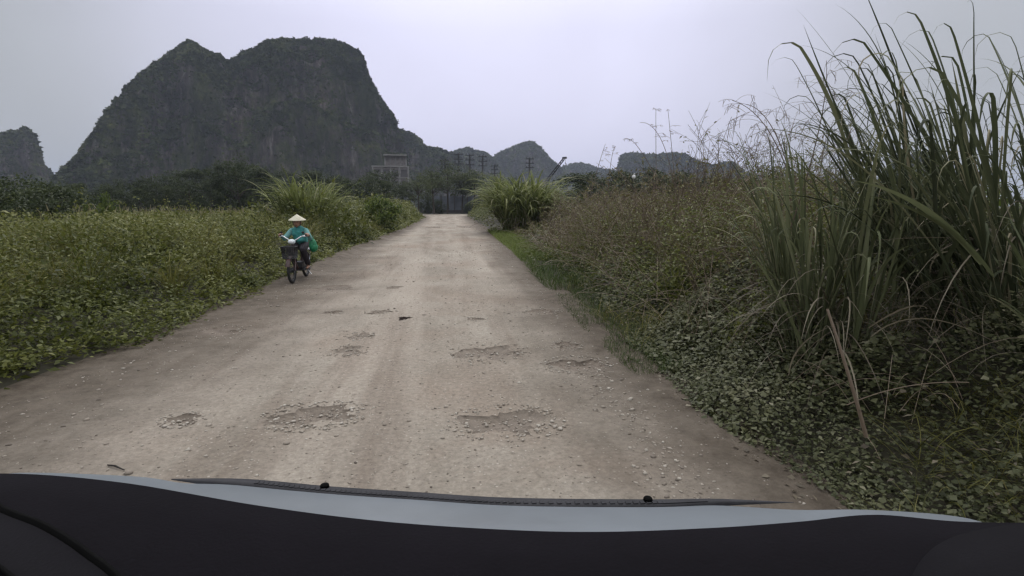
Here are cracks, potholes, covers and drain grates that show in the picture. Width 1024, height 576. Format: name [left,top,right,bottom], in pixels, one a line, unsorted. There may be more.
pothole [343,331,375,341]
pothole [450,342,531,364]
pothole [157,411,210,429]
pothole [328,344,369,357]
pothole [447,403,566,442]
pothole [540,355,614,374]
pothole [550,340,584,351]
pothole [258,400,367,433]
